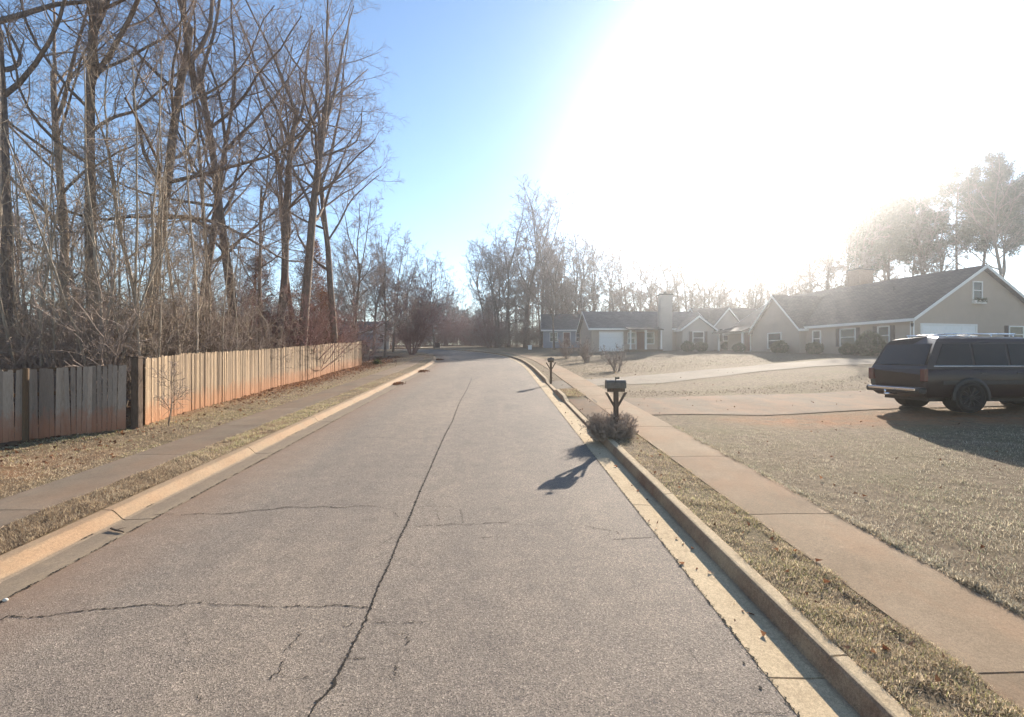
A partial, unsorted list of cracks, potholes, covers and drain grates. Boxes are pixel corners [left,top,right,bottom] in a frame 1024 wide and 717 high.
crack [0,364,437,678]
